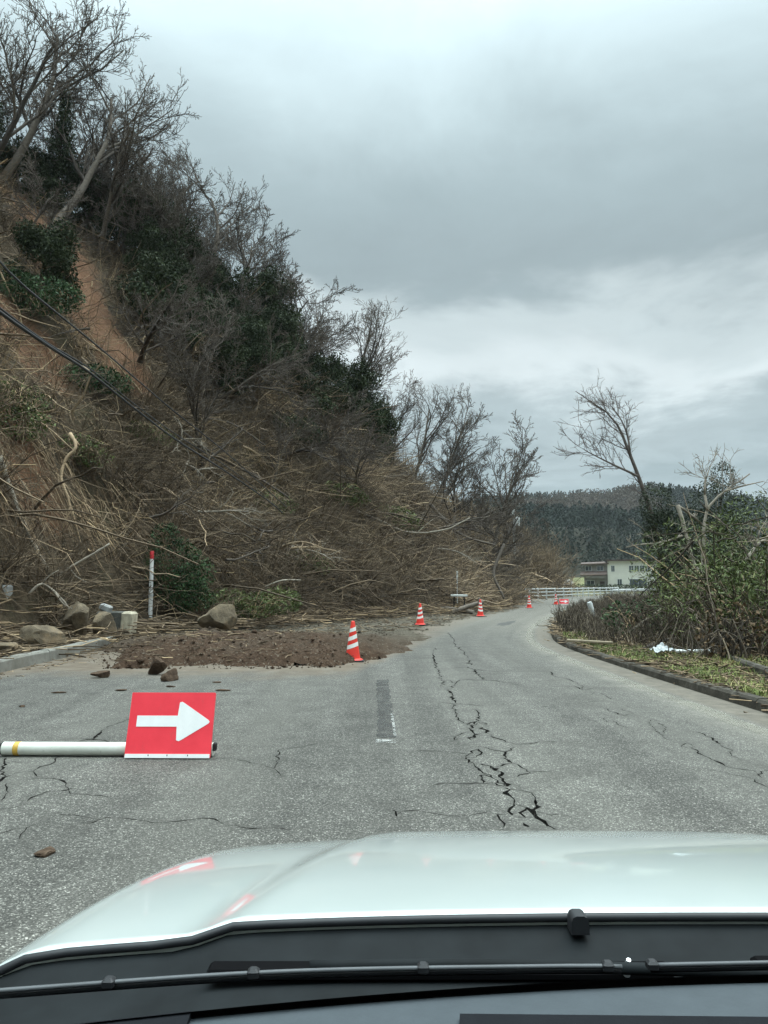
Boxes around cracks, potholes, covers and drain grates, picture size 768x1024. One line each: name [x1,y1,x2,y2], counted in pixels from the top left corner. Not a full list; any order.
crack [393,650,556,829]
crack [0,719,129,810]
crack [649,720,767,786]
crack [54,813,291,830]
